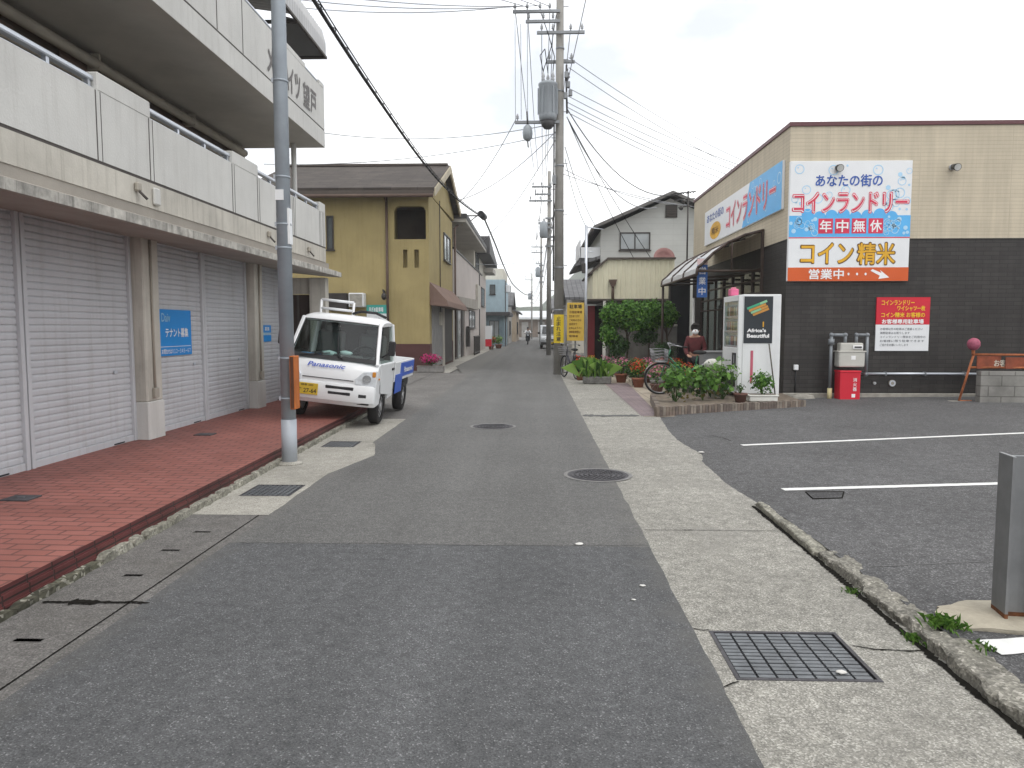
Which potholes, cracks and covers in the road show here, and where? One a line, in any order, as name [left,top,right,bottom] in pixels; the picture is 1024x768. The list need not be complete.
drain grate [239,484,305,496]
drain grate [709,630,884,682]
manhole cover [805,491,844,499]
manhole cover [564,468,632,482]
